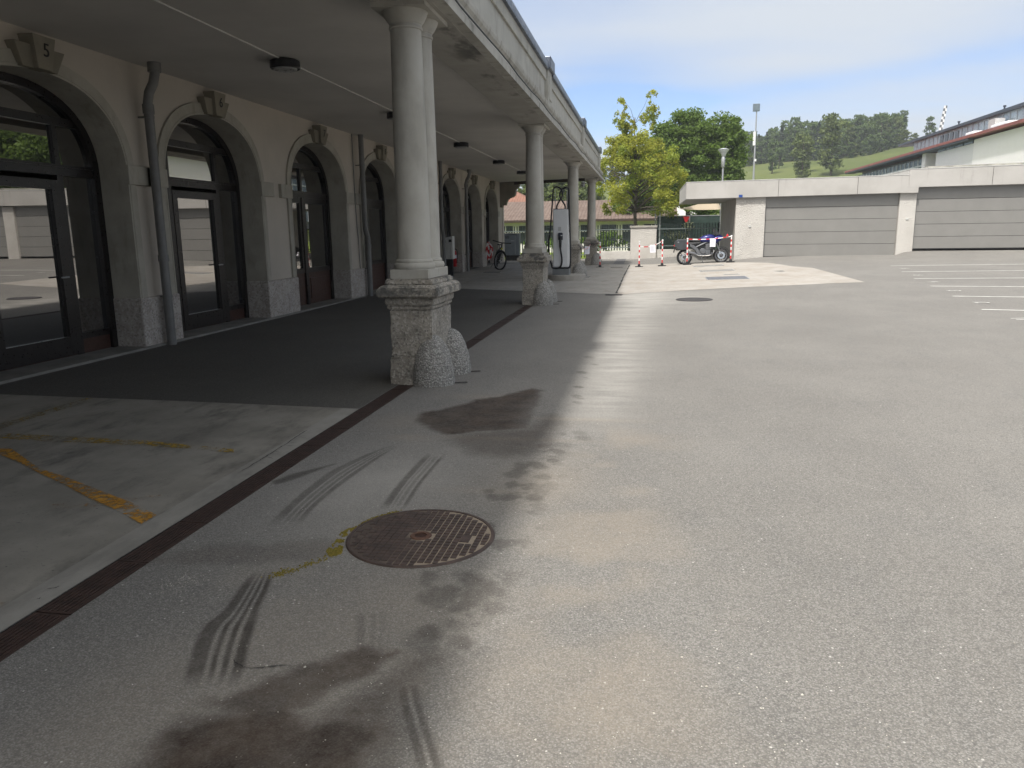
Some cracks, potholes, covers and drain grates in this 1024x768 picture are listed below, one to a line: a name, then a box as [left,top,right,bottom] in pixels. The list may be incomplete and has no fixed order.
manhole cover [345,509,495,568]
